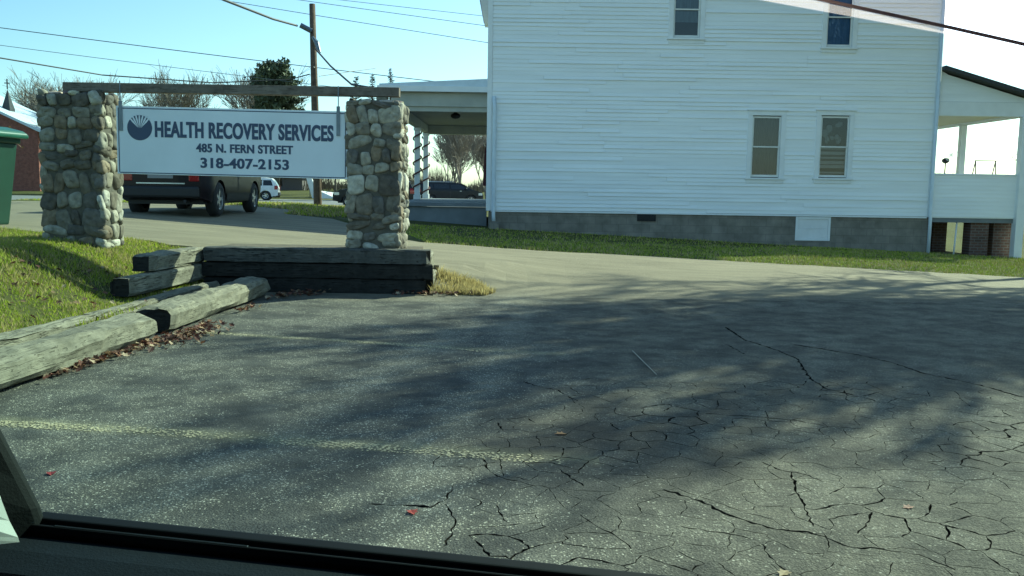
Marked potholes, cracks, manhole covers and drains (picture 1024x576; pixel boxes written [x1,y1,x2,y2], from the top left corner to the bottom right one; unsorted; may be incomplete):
crack [372,485,457,547]
crack [433,378,1024,576]
crack [725,327,1022,397]
